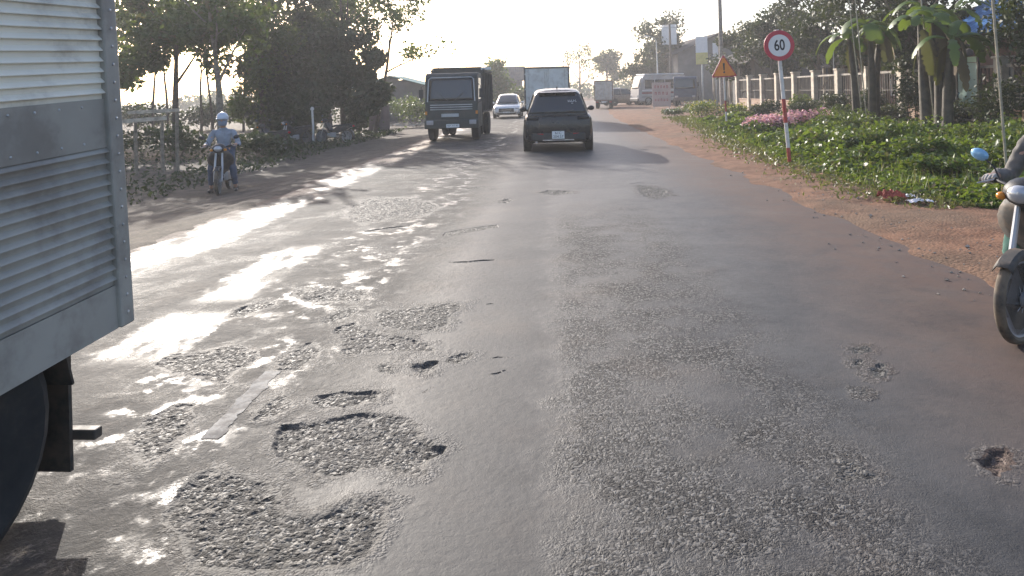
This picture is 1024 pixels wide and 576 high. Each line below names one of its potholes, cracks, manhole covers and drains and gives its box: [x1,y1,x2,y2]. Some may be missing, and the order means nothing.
pothole [330,321,440,356]
pothole [160,462,398,573]
pothole [368,301,471,333]
pothole [975,447,1017,477]
pothole [868,363,888,379]
pothole [147,344,262,386]
pothole [123,402,198,469]
pothole [266,412,452,482]
pothole [407,360,440,375]
pothole [849,346,872,355]
pothole [308,390,383,411]
crack [442,225,499,236]
